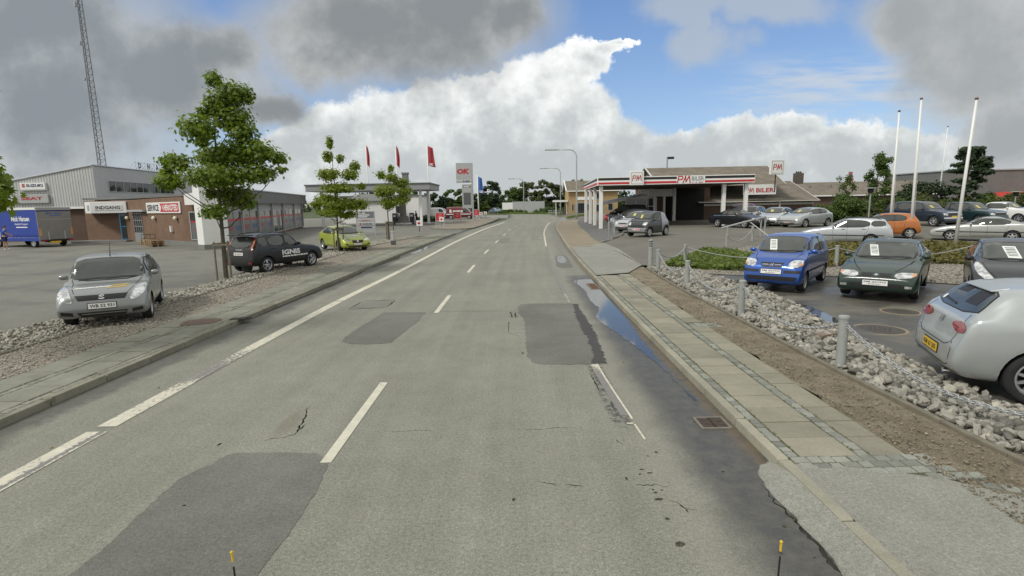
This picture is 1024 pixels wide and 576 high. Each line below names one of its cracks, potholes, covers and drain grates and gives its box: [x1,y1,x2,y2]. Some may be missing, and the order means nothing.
drain grate [692,416,733,430]
crack [265,407,309,441]
manhole cover [854,324,910,335]
manhole cover [180,318,221,326]
